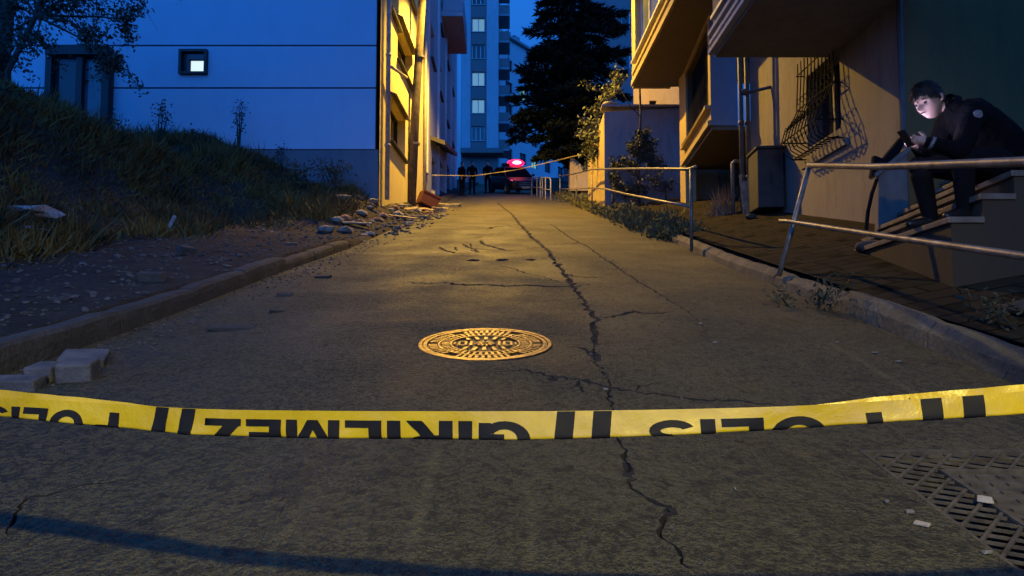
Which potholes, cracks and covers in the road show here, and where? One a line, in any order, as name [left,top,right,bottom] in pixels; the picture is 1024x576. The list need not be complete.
manhole cover [418,328,552,361]
crack [411,202,778,570]
crack [5,479,131,539]
